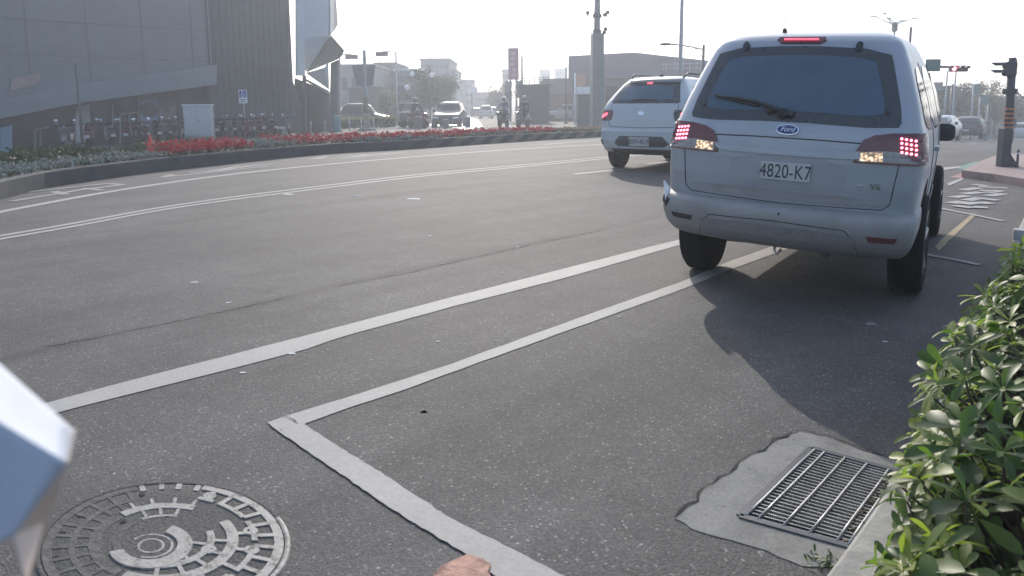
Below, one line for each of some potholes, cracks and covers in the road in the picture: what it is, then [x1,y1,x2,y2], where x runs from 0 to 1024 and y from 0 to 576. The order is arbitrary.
drain grate [736,446,897,549]
manhole cover [35,481,291,576]
